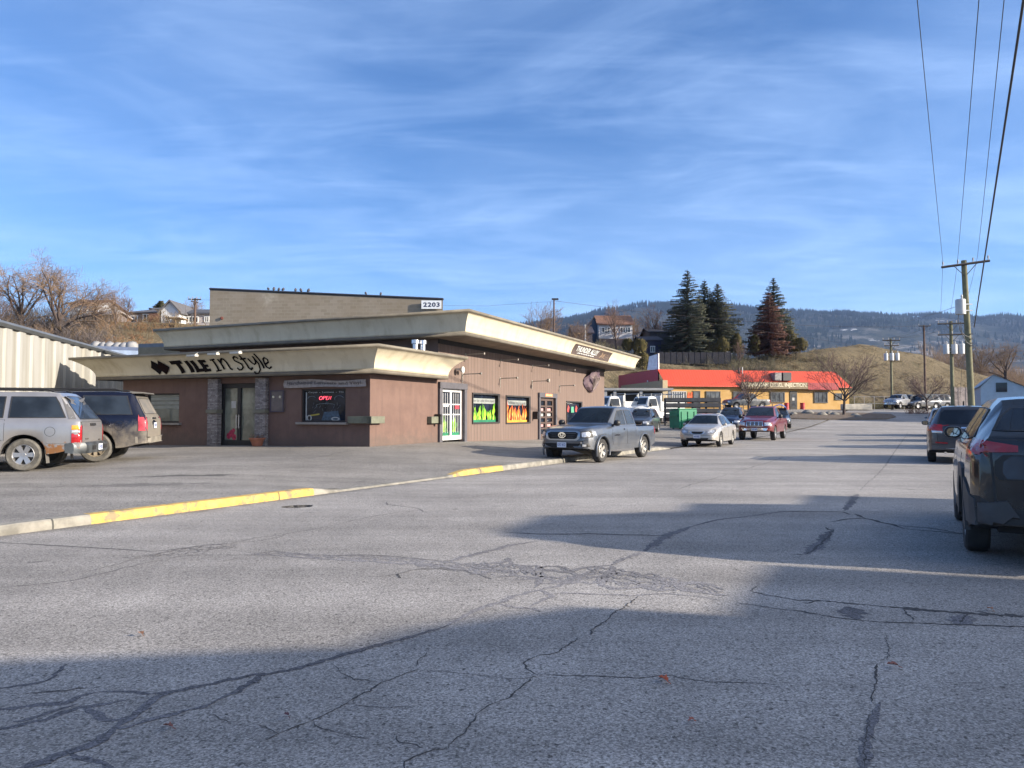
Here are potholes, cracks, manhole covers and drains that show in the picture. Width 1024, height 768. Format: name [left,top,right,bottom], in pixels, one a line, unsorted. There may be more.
crack [742,586,1024,627]
crack [832,514,963,534]
crack [260,596,778,768]
